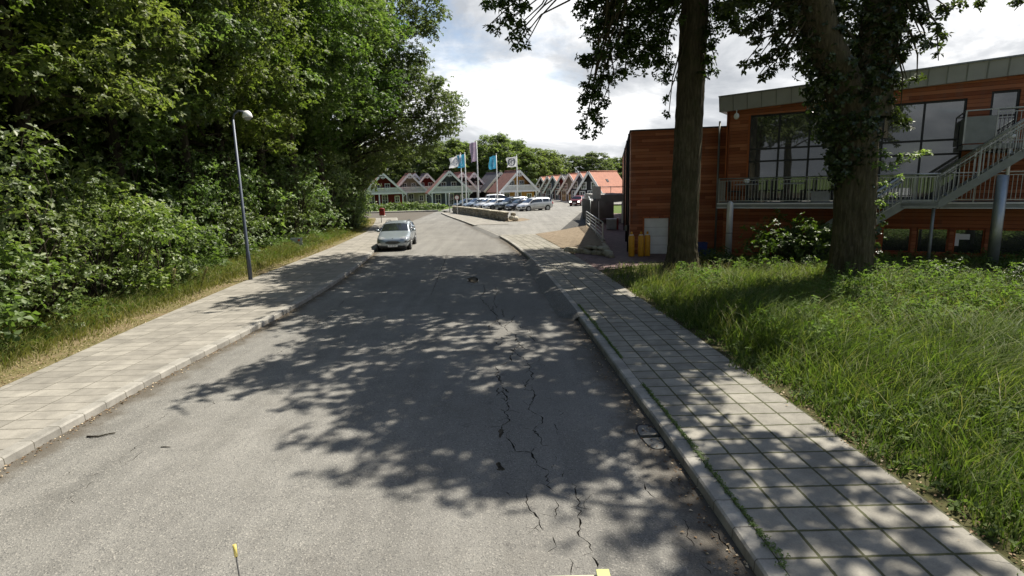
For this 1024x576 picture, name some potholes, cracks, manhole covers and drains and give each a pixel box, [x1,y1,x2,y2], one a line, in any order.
manhole cover [635,424,667,450]
crack [469,278,599,572]
crack [644,477,736,573]
